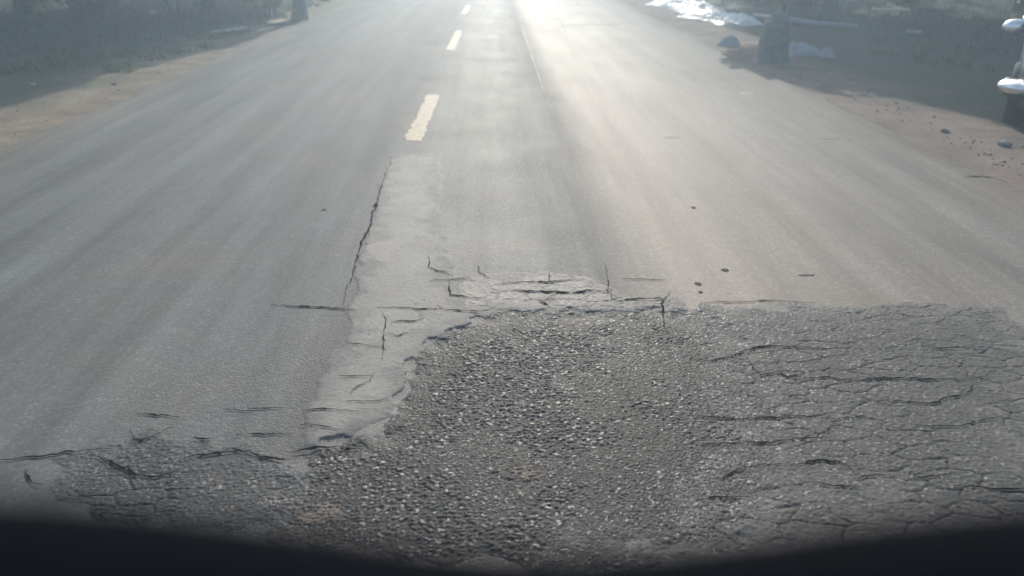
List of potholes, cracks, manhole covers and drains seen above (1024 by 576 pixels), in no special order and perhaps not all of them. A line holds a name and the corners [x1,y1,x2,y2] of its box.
pothole [264,307,811,551]
crack [690,345,1022,500]
crack [347,257,673,354]
crack [271,174,385,310]
crack [0,413,357,484]
